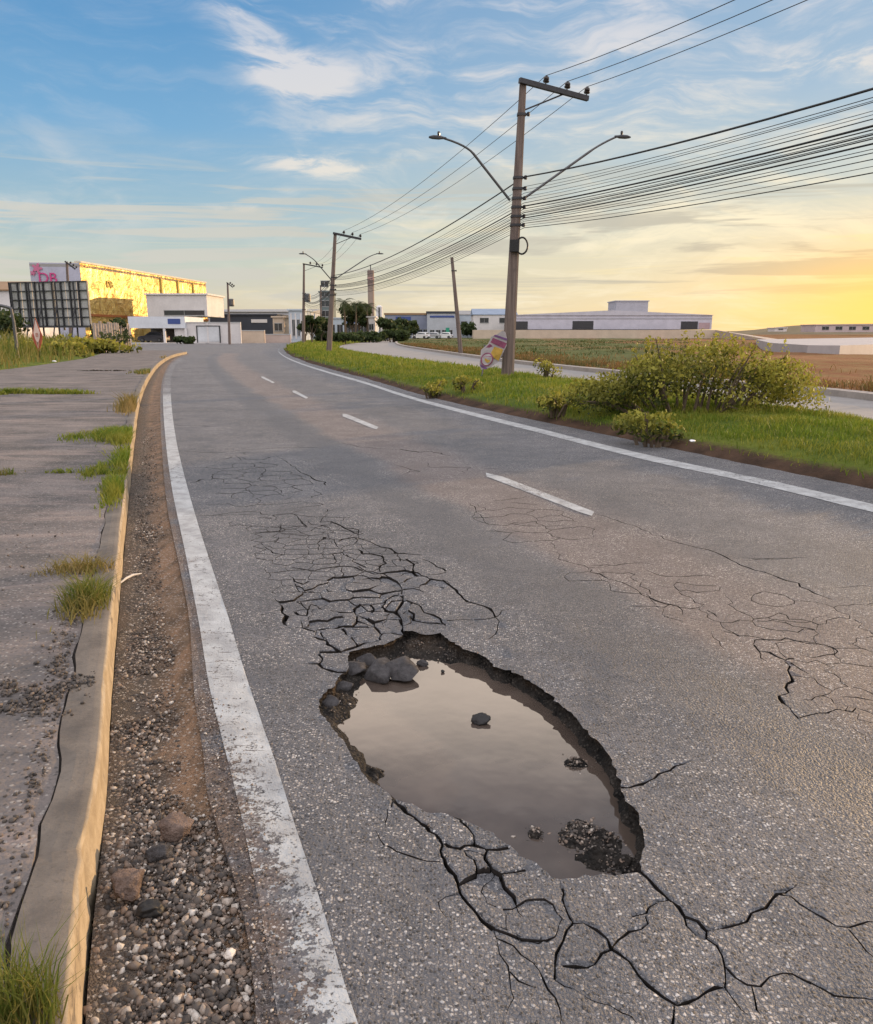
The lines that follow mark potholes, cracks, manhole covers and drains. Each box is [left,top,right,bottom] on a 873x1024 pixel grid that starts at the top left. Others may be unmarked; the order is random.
crack [556,552,873,745]
crack [375,802,873,1024]
pothole [318,631,645,876]
crack [472,498,599,553]
crack [185,447,509,679]
